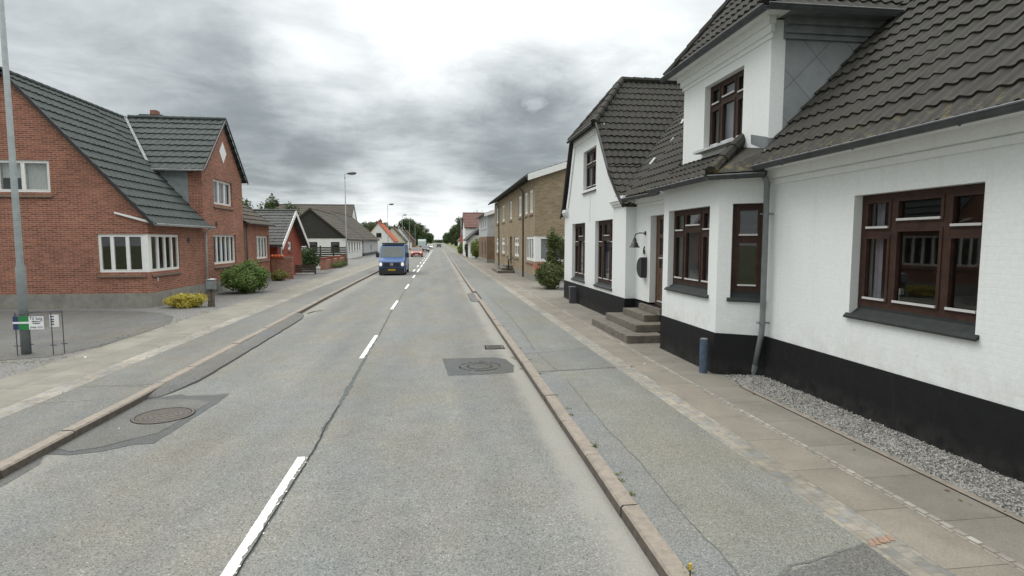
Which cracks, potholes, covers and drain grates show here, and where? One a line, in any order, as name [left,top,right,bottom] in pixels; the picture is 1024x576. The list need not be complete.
manhole cover [130,407,196,424]
